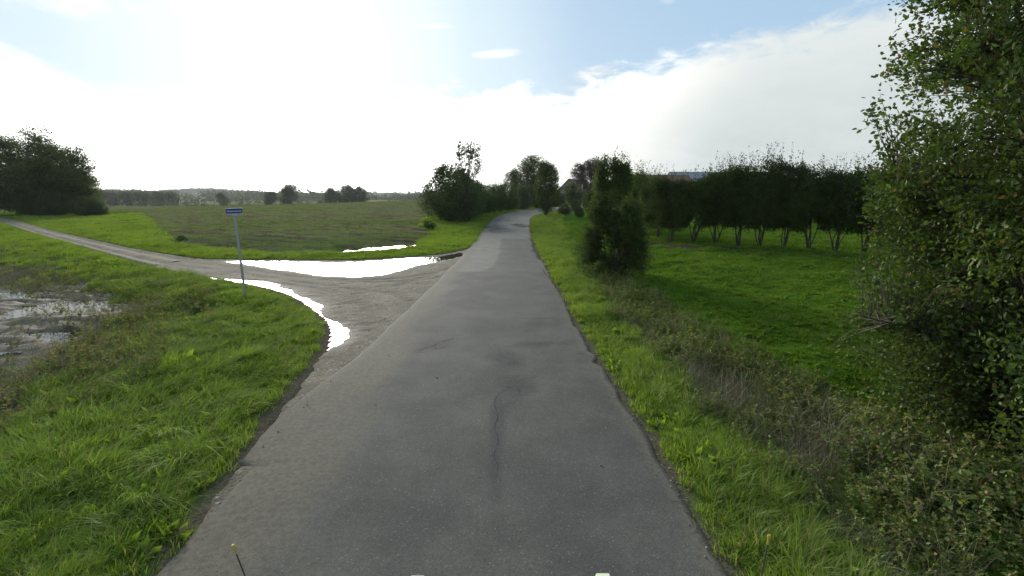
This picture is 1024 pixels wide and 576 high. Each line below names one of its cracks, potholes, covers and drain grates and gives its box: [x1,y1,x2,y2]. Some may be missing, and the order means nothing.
crack [494,343,545,475]
